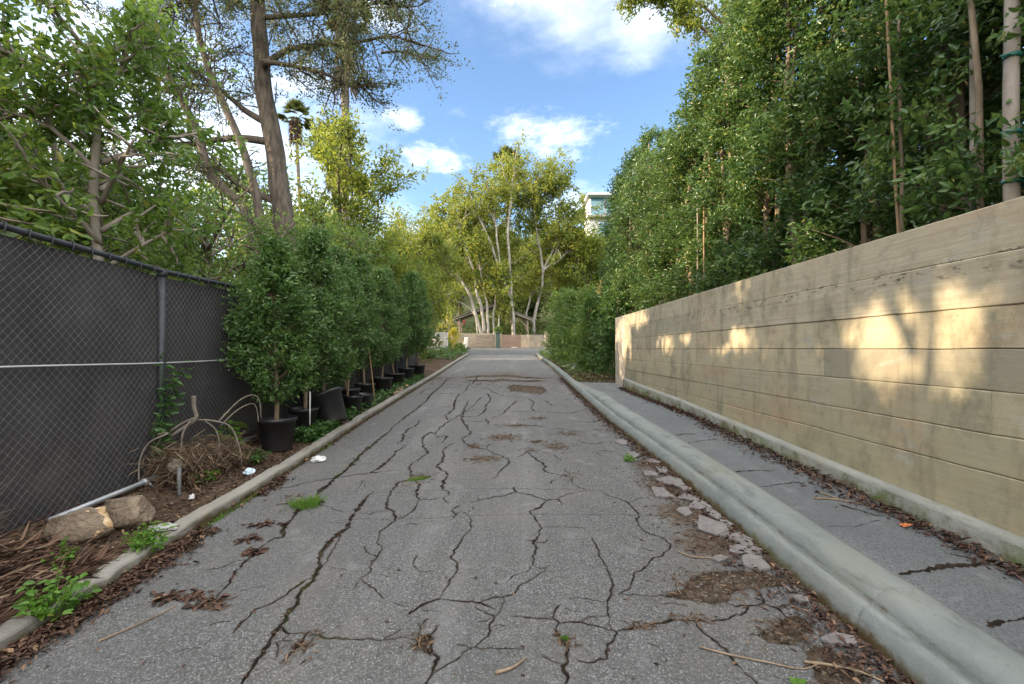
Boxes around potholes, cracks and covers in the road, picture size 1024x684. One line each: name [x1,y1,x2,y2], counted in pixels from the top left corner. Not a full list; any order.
pothole [509,385,546,394]
crack [986,617,1024,628]
crack [898,553,990,575]
pothole [758,615,811,645]
pothole [659,571,786,604]
crack [176,360,802,684]
